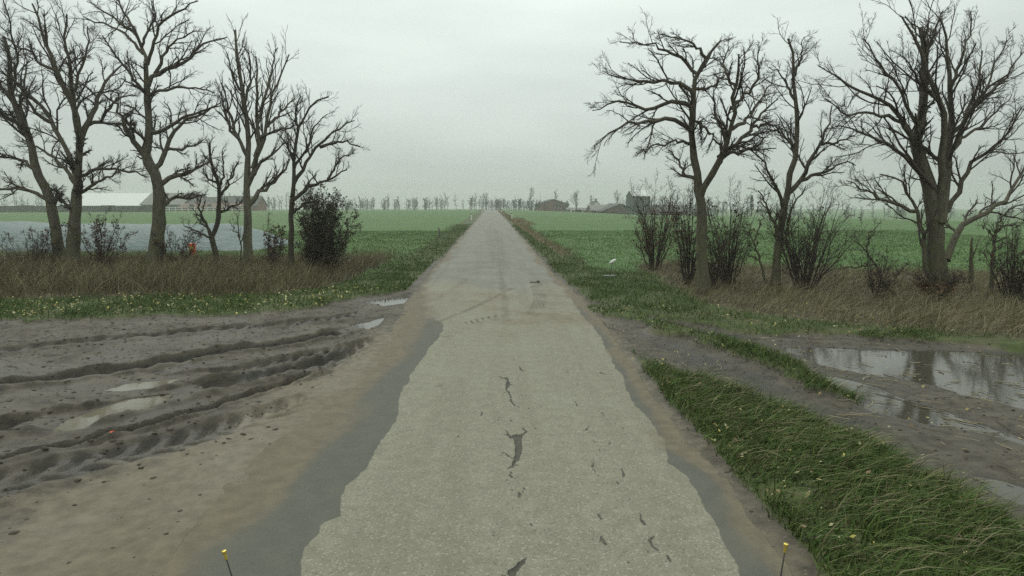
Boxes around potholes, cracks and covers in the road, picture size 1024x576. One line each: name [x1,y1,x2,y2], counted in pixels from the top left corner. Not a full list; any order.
crack [493,557,527,576]
crack [480,359,536,536]
crack [597,514,608,545]
